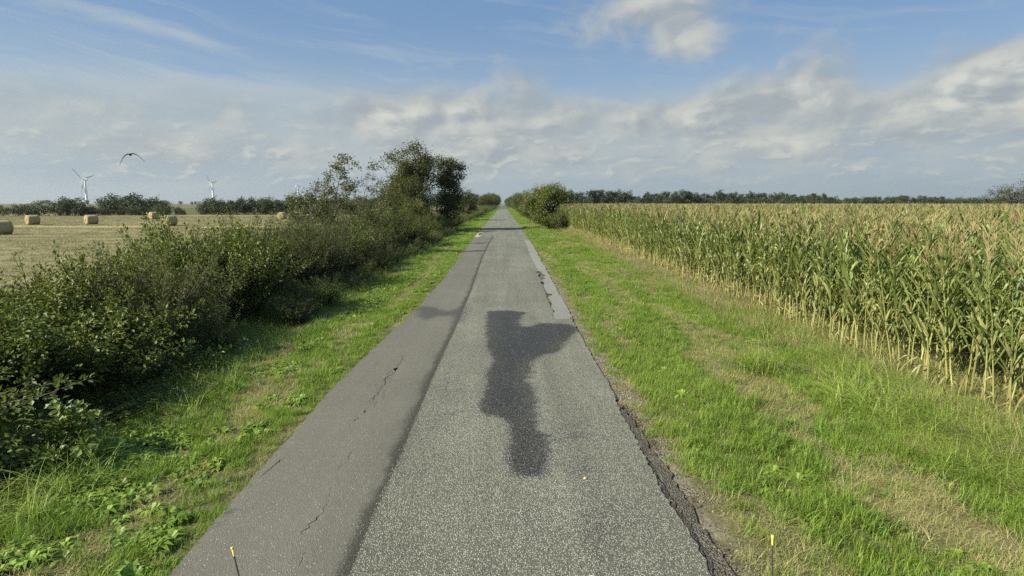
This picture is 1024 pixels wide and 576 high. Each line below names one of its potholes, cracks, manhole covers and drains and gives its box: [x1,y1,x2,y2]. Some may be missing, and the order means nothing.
crack [354,356,404,421]
